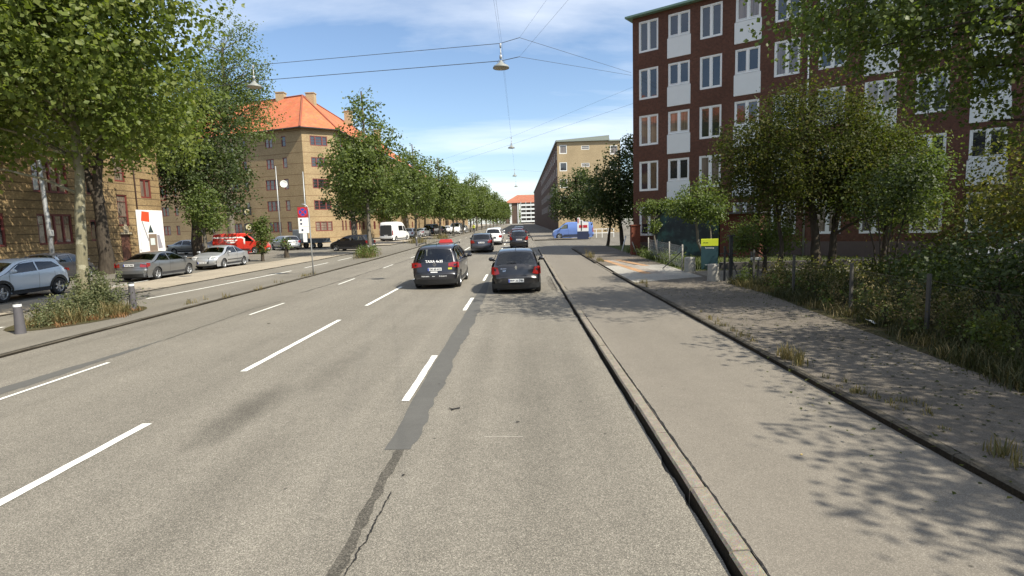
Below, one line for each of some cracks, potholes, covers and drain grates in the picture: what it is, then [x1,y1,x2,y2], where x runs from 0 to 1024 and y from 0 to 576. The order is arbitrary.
crack [344,492,391,576]
